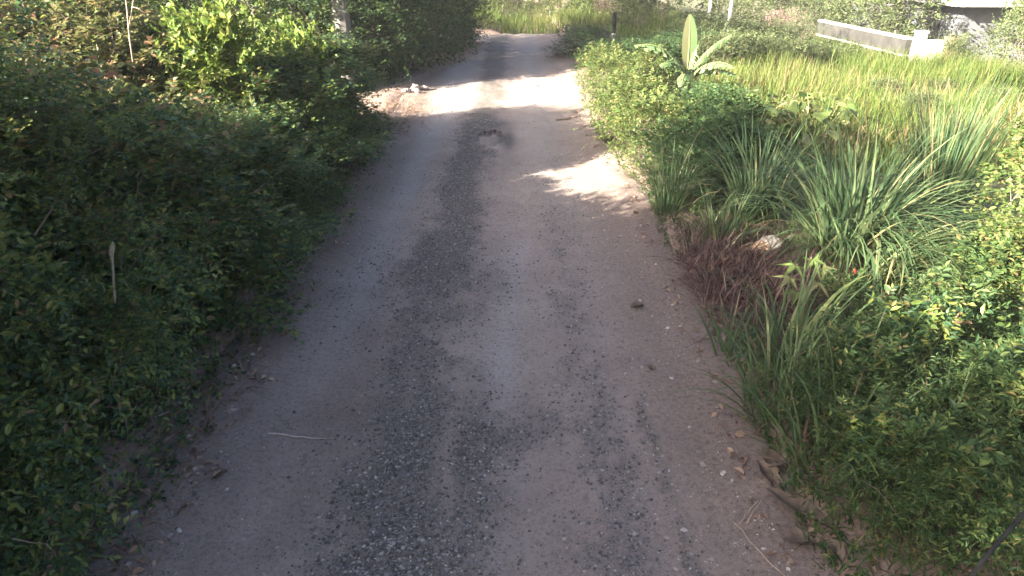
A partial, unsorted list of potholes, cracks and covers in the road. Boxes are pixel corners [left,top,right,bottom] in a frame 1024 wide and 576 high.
pothole [472,129,507,147]
